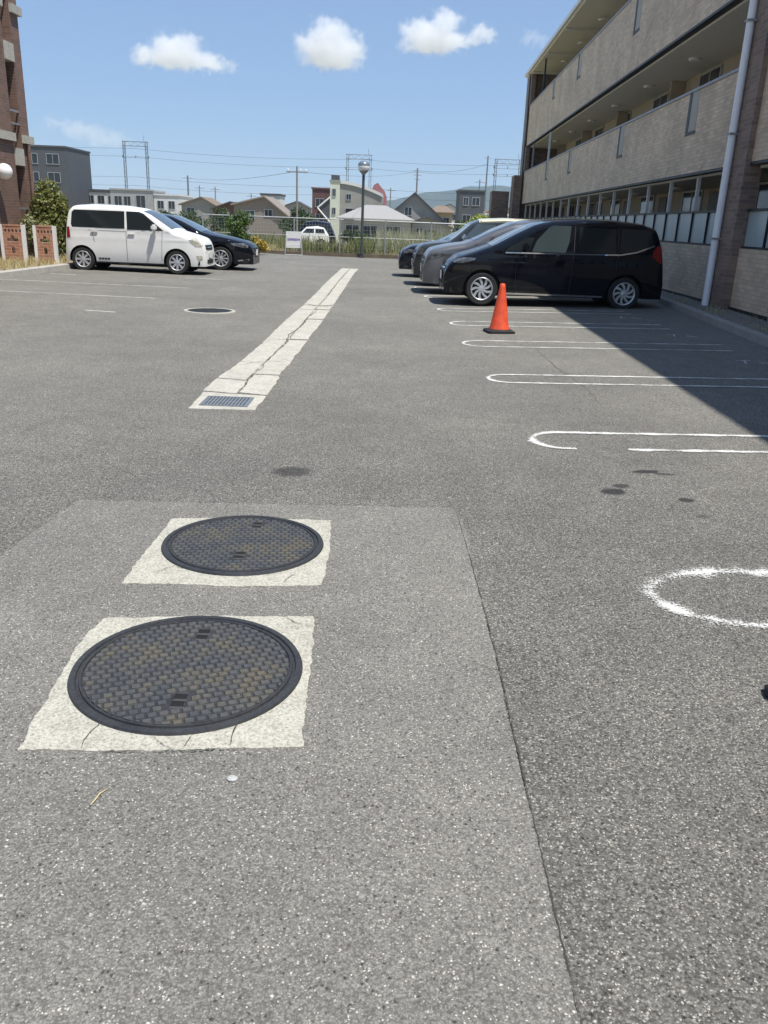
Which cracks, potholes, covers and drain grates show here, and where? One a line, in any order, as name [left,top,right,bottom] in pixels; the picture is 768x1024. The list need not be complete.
crack [81,723,237,752]
manhole cover [17,615,315,752]
drain grate [199,396,254,407]
crack [214,271,348,395]
manhole cover [122,515,332,587]
